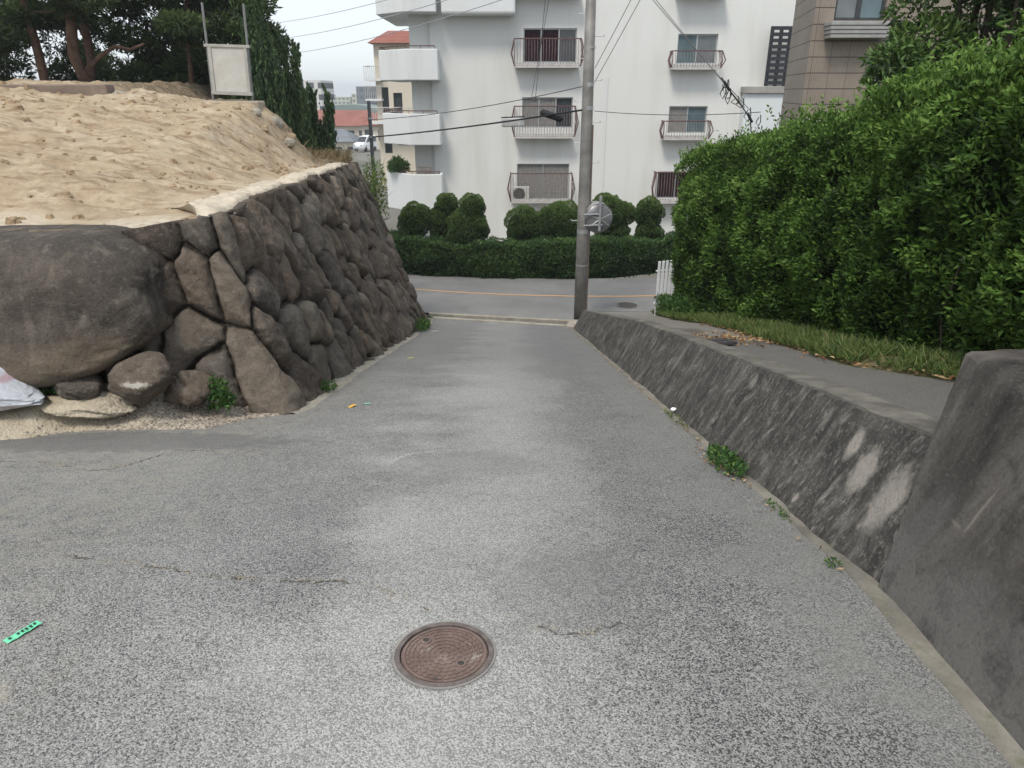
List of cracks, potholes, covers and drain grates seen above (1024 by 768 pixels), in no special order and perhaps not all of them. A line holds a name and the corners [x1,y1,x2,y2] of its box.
crack [503,615,633,637]
crack [0,449,220,471]
manhole cover [392,621,496,691]
crack [65,551,433,612]
